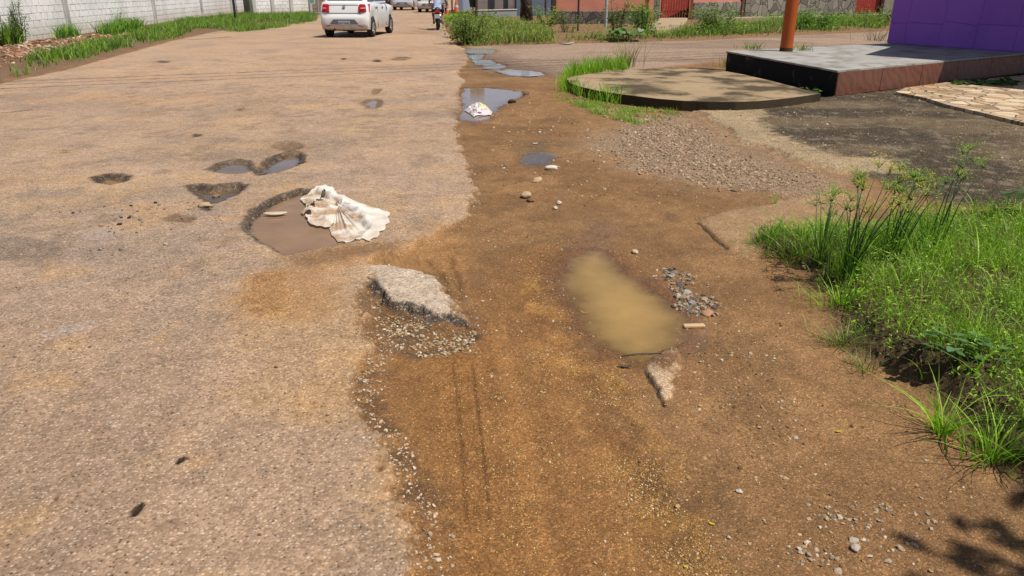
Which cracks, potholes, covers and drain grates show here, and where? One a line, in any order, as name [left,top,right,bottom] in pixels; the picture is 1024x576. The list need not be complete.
pothole [240,188,358,255]
pothole [254,150,308,175]
pothole [373,290,483,360]
pothole [478,62,509,70]
pothole [185,181,251,204]
pothole [496,68,548,77]
pothole [520,153,555,165]
pothole [131,501,147,516]
pothole [204,159,268,174]
pothole [359,98,386,109]
crack [696,221,730,250]
pothole [454,87,529,122]
